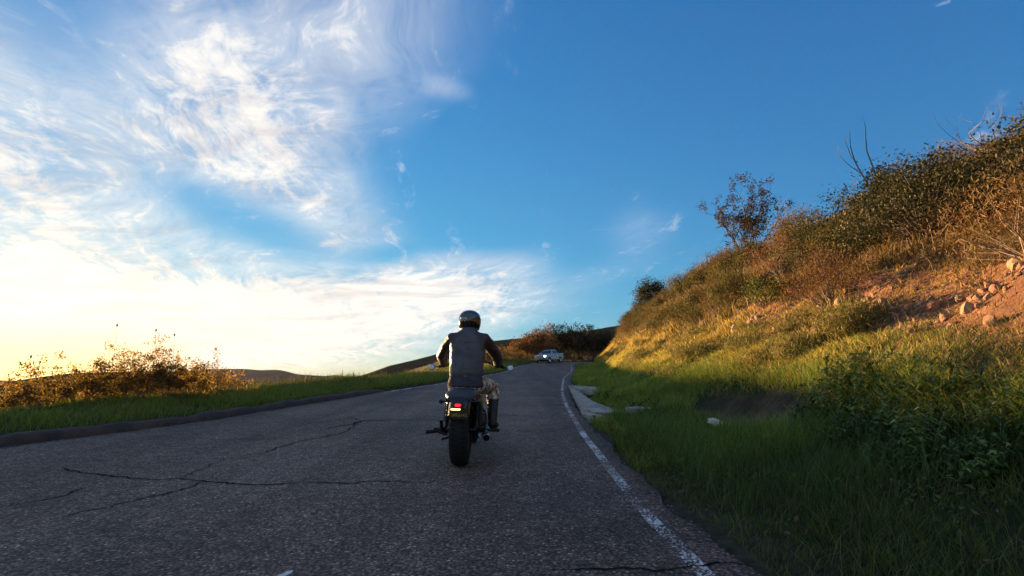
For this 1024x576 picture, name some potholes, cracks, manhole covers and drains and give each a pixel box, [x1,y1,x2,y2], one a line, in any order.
crack [0,417,477,518]
crack [539,561,759,571]
